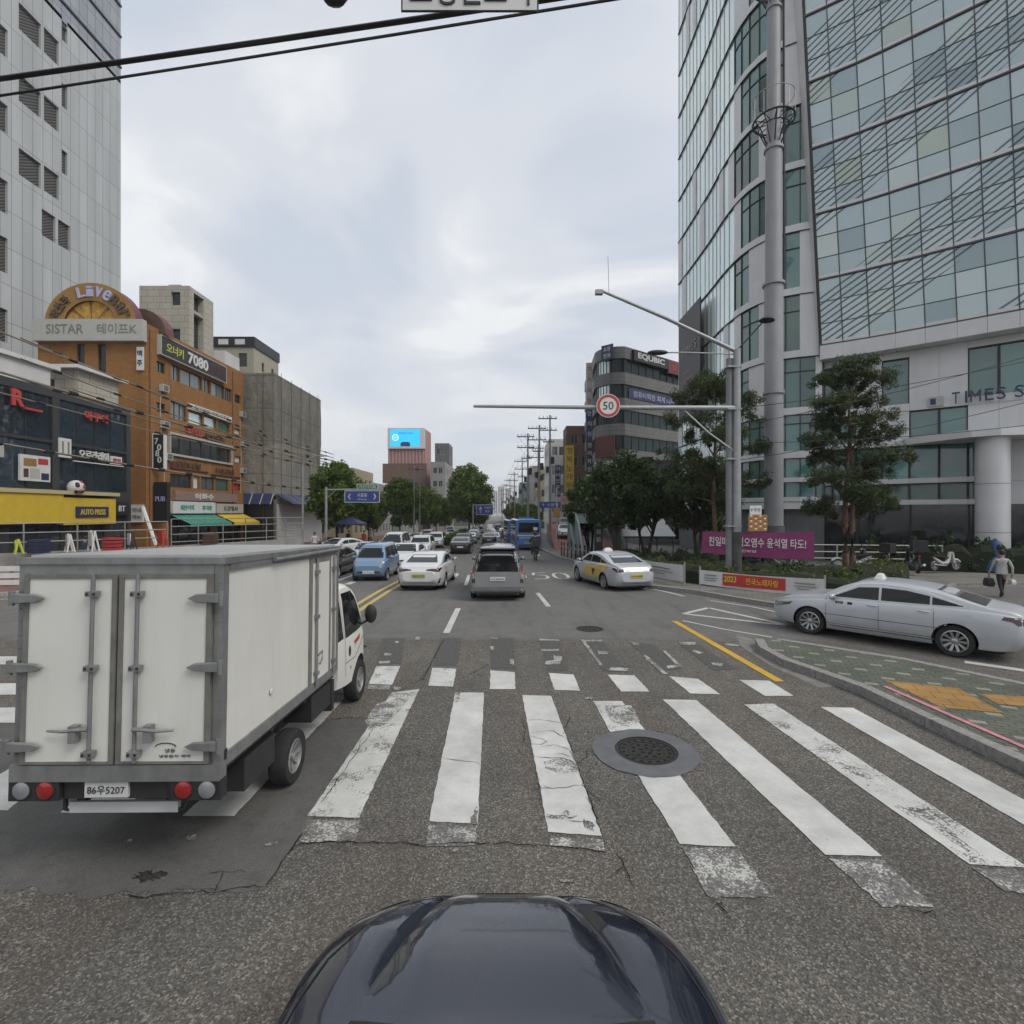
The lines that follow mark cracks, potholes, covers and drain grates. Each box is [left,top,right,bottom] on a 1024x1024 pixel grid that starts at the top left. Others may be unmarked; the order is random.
pothole [131,870,168,883]
crack [127,870,266,898]
manhole cover [592,729,700,777]
